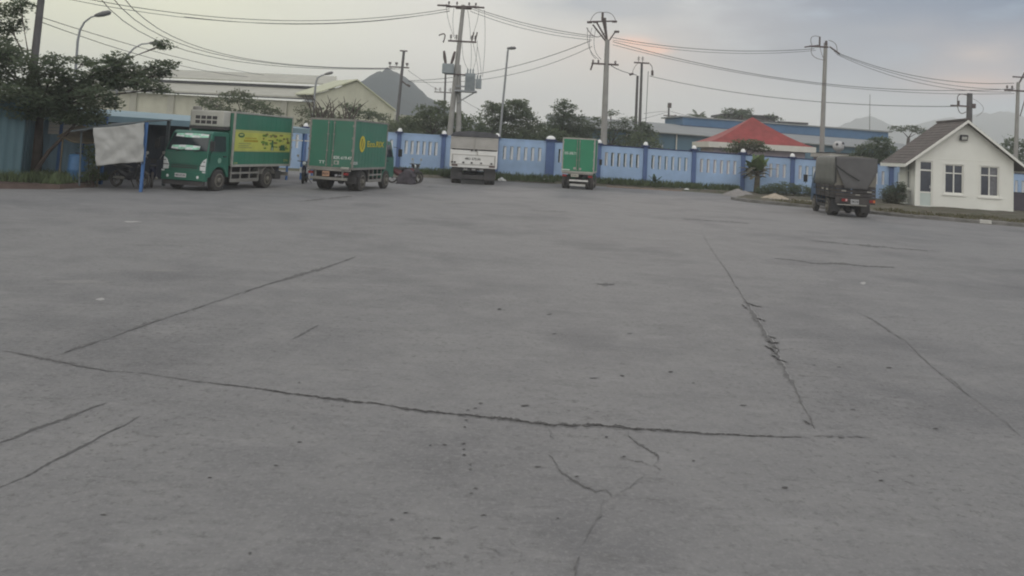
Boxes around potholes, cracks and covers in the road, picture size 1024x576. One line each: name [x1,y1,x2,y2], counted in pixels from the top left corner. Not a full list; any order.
crack [866,316,1016,432]
crack [776,241,941,268]
crack [4,219,870,496]
